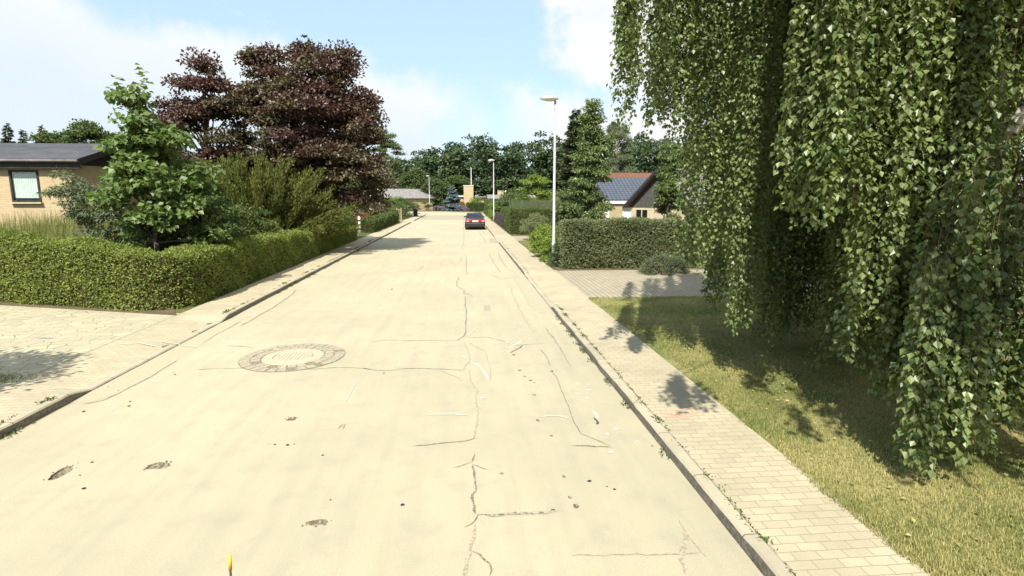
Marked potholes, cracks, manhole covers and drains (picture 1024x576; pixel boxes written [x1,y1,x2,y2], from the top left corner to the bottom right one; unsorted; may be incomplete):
crack [216,216,609,576]
pothole [43,462,79,480]
manhole cover [238,343,345,372]
pothole [143,460,172,470]
crack [571,521,705,576]
pothole [301,519,332,527]
